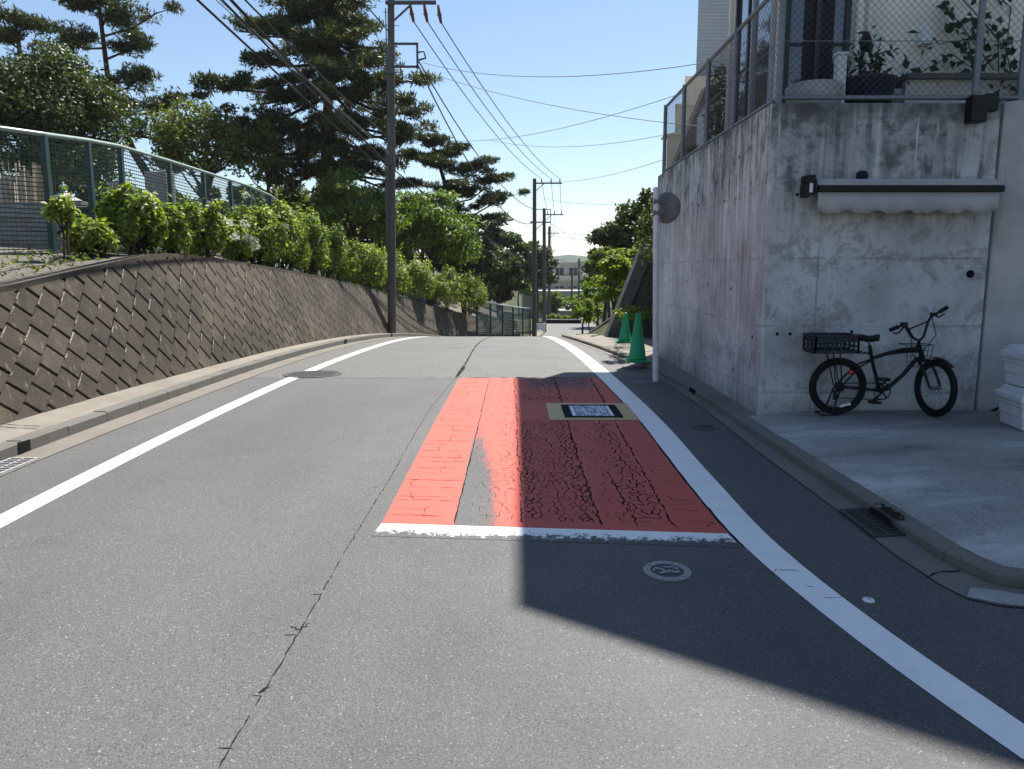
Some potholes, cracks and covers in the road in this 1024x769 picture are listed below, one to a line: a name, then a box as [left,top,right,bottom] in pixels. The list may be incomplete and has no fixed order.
manhole cover [643,561,691,581]
drain grate [0,457,40,475]
manhole cover [283,370,342,378]
drain grate [839,507,905,538]
manhole cover [561,405,624,418]
crack [219,379,476,767]
